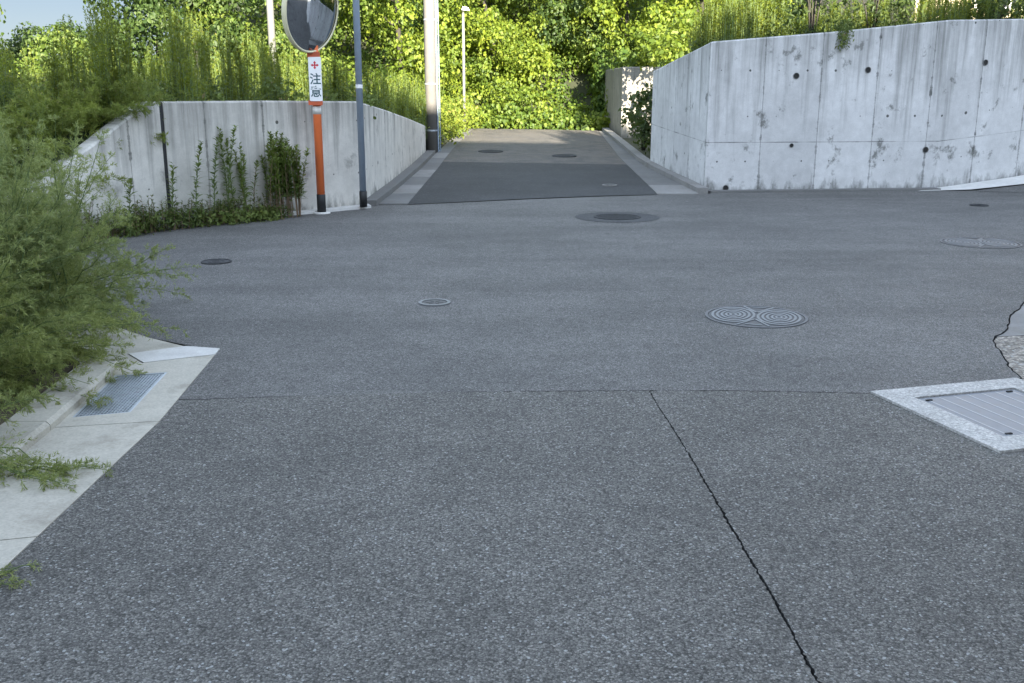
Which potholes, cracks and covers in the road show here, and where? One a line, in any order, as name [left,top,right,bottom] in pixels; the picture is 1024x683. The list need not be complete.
manhole cover [940,237,1022,249]
manhole cover [575,212,660,222]
drain grate [73,372,167,417]
manhole cover [705,305,808,328]
crack [480,390,845,683]
